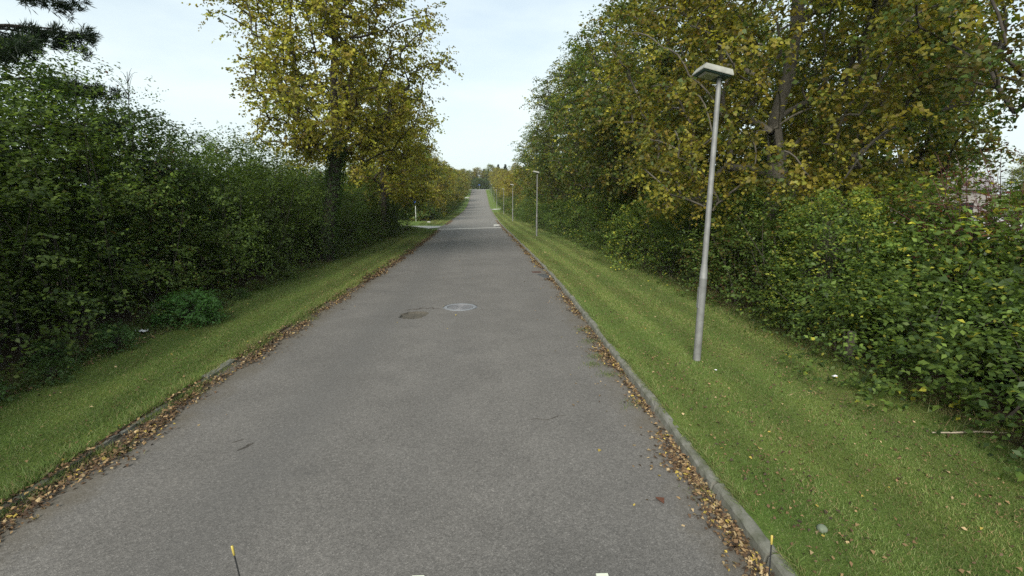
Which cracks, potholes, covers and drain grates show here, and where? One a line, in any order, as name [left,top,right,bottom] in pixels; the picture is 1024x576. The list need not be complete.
manhole cover [443,303,477,311]
